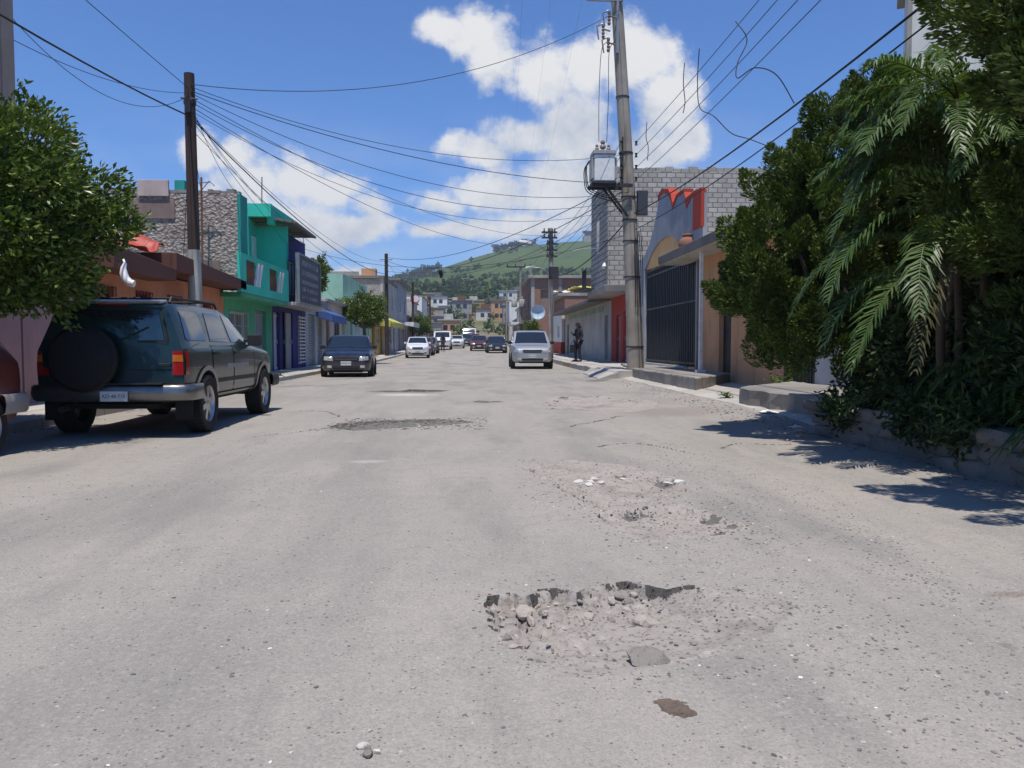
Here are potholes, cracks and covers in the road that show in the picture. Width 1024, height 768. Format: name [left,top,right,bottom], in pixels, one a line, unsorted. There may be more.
pothole [328,419,475,430]
pothole [484,581,795,676]
